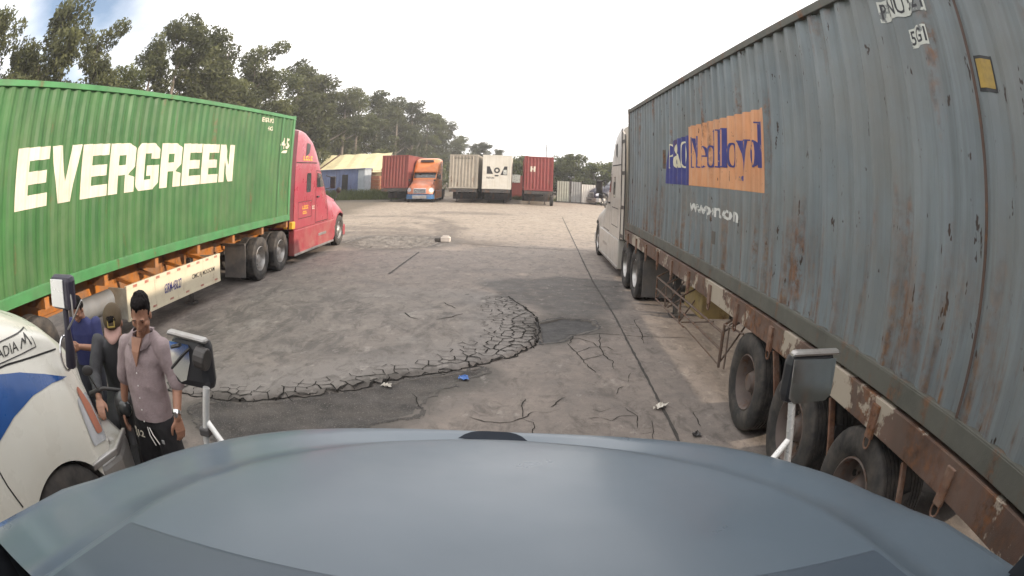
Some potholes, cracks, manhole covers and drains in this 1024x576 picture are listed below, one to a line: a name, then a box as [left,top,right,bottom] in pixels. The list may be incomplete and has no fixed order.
crack [167,296,541,408]
crack [471,398,562,433]
crack [567,308,684,393]
crack [588,410,654,437]
